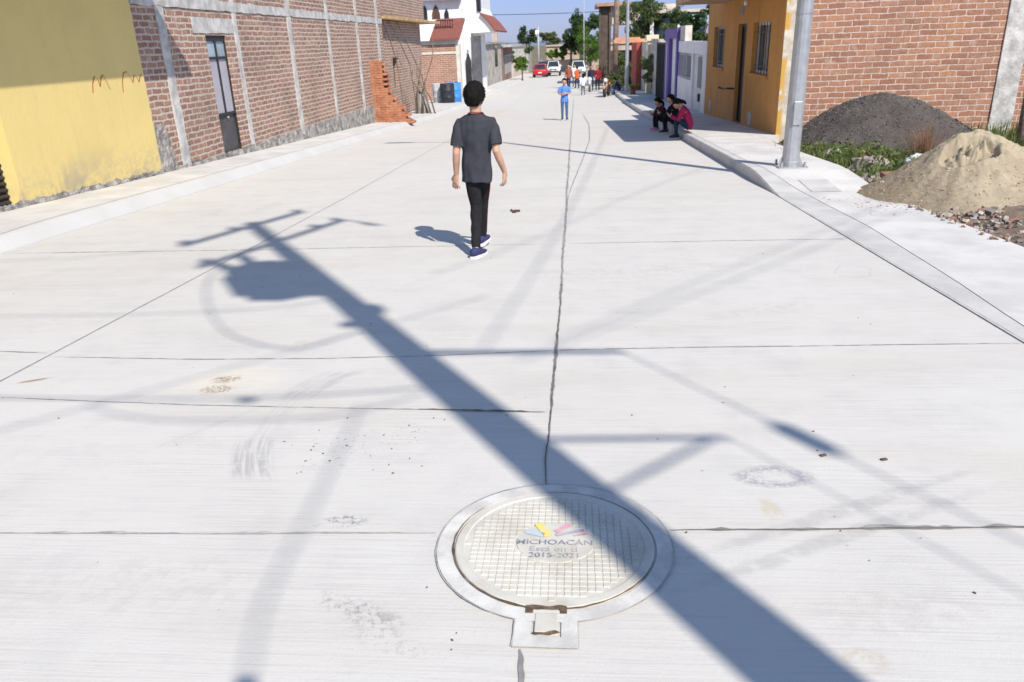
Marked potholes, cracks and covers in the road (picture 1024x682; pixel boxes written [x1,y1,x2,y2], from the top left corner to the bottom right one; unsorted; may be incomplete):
crack [9,99,983,485]
manhole cover [435,484,675,649]
